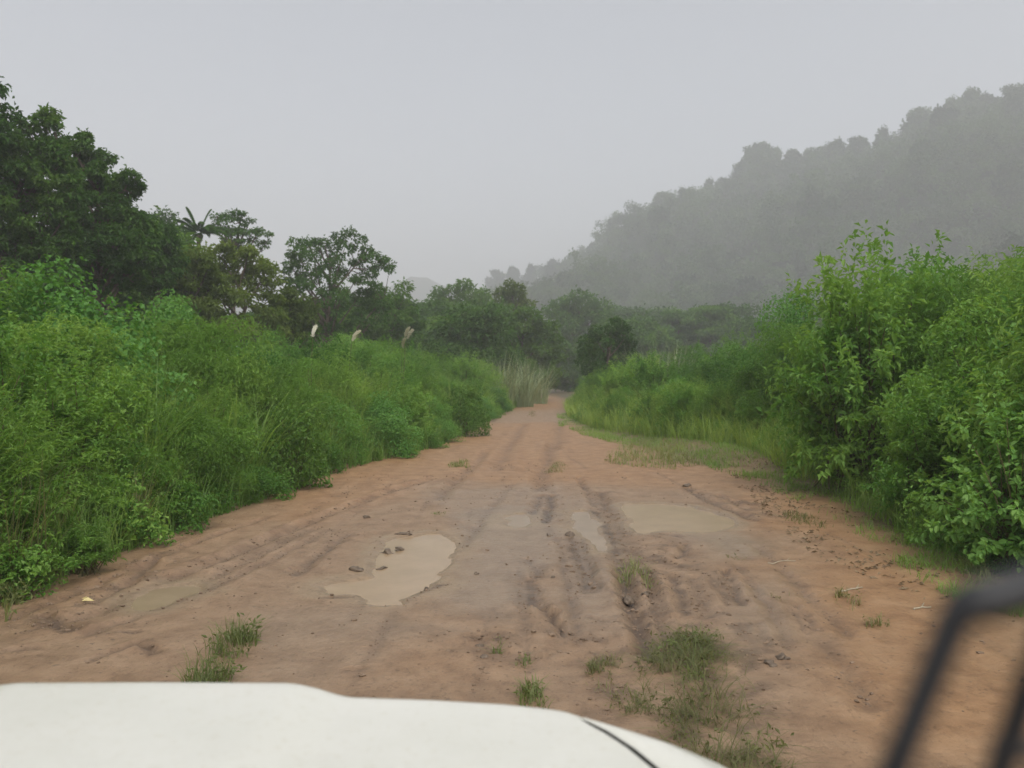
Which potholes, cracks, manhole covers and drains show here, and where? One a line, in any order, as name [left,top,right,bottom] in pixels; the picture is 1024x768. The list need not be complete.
pothole [308,531,467,607]
pothole [562,509,622,556]
pothole [610,502,743,534]
pothole [116,581,215,614]
pothole [494,512,540,529]
